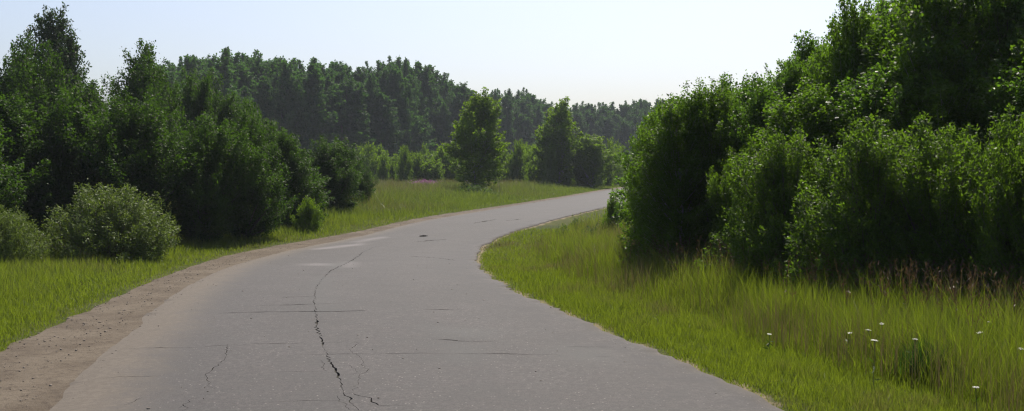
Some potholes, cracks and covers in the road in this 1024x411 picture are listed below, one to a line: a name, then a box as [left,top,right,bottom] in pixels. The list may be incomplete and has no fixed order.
crack [159,343,283,410]
crack [243,249,507,410]
